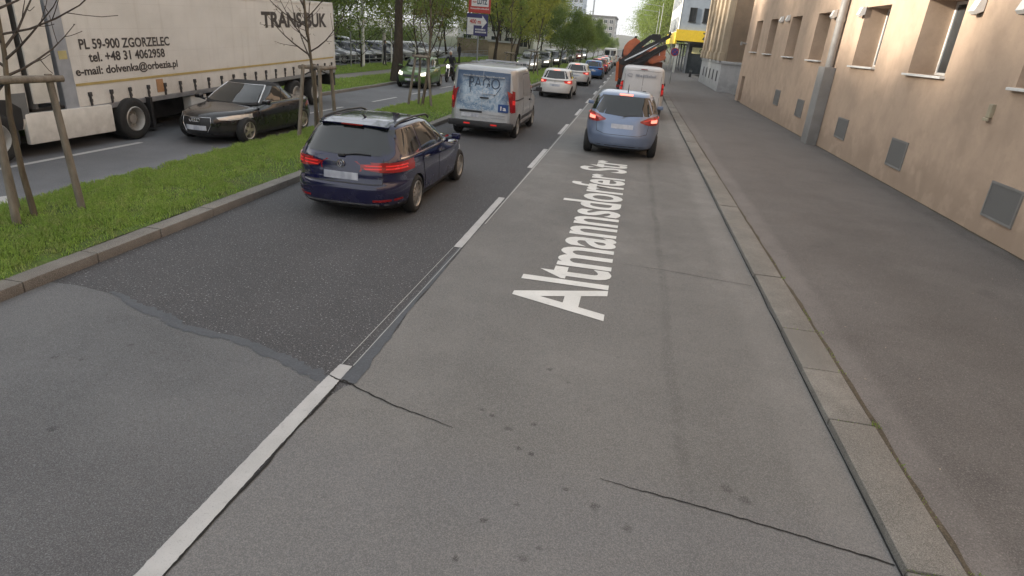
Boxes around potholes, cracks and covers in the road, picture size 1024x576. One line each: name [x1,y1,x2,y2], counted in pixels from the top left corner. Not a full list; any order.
crack [602,123,903,576]
crack [162,374,453,576]
